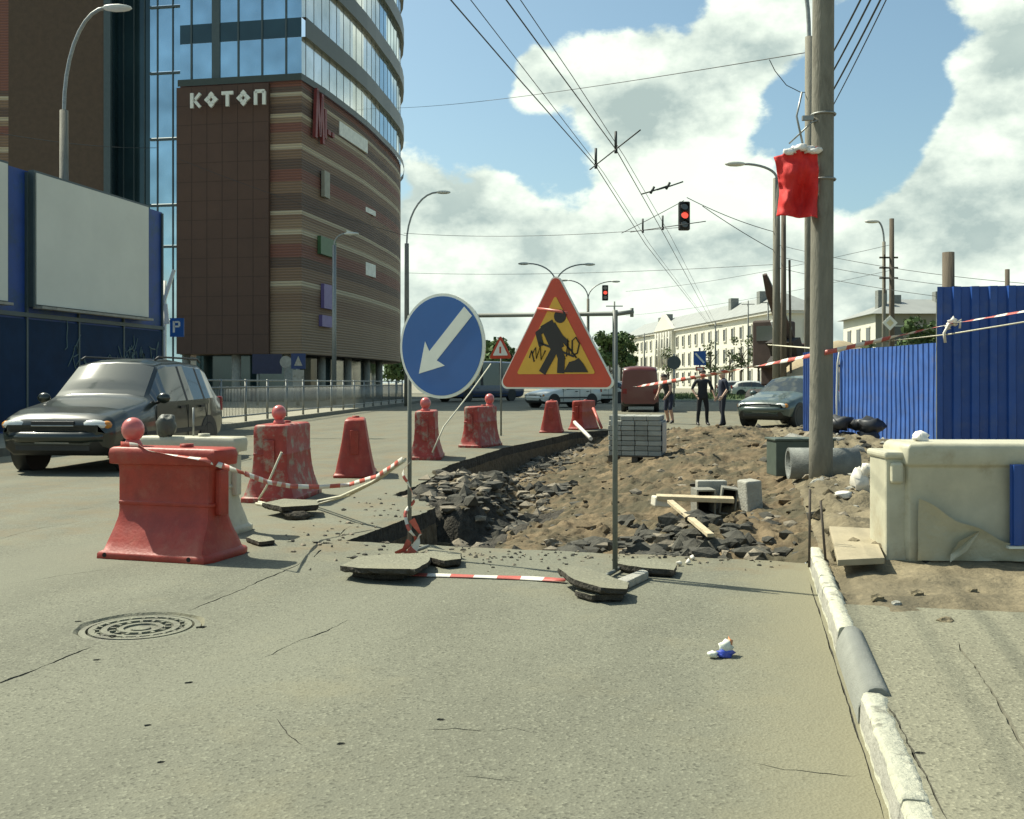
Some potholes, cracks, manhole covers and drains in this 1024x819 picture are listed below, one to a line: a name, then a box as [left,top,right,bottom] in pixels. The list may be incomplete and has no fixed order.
manhole cover [72,612,205,642]
